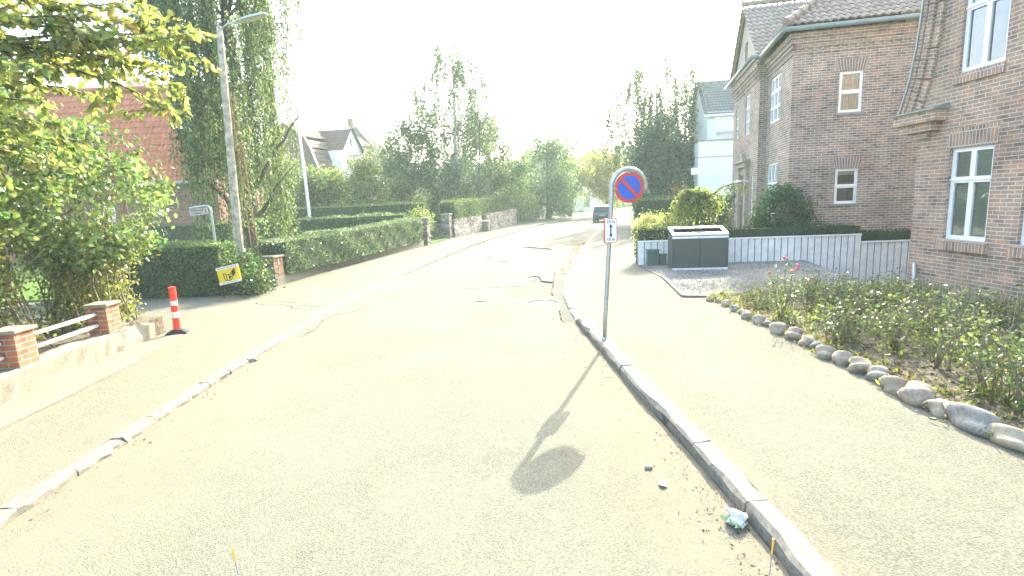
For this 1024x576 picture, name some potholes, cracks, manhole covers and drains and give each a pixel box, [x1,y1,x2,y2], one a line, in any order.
crack [256,302,374,338]
